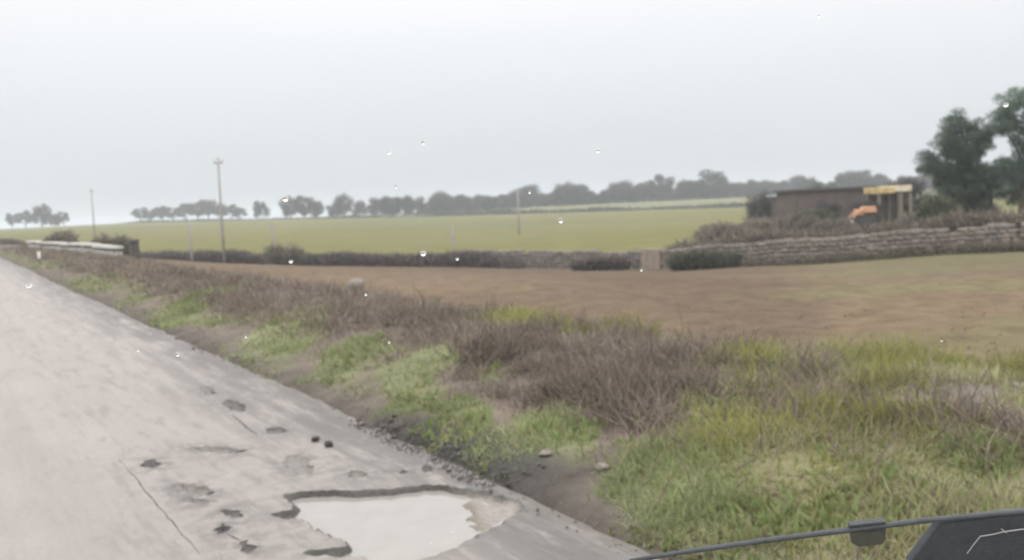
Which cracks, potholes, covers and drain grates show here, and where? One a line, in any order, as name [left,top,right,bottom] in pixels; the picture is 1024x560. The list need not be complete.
pothole [213,523,233,534]
pothole [346,470,369,478]
pothole [271,484,529,560]
pothole [221,509,243,518]
pothole [222,399,246,411]
pothole [238,540,258,554]
crack [119,460,198,552]
pothole [140,459,162,468]
pothole [170,483,215,496]
pothole [282,455,314,475]
